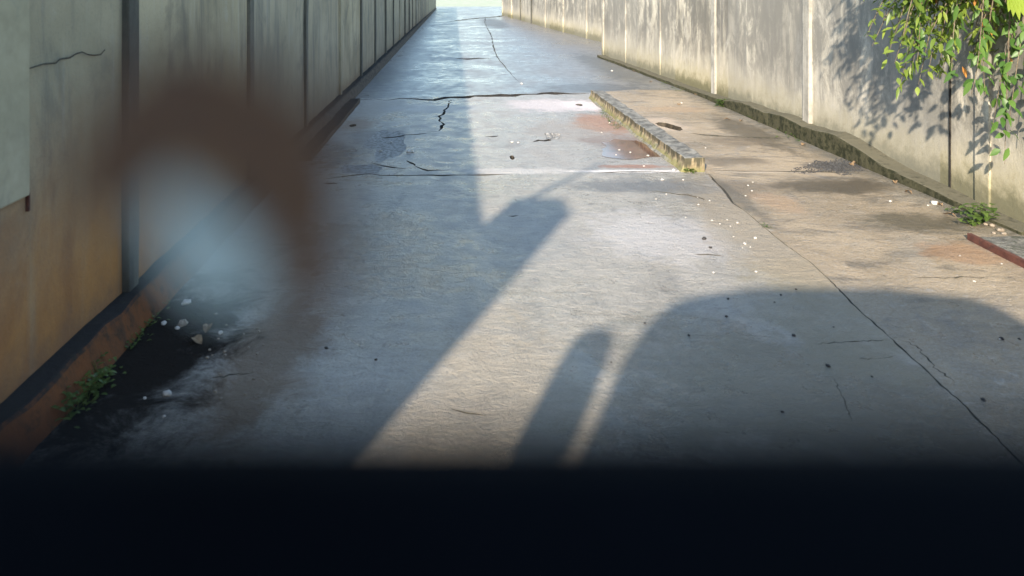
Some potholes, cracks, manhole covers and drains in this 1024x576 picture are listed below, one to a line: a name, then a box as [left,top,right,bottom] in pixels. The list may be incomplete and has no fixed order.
crack [373,161,444,171]
crack [821,339,955,382]
pothole [655,122,683,131]
crack [365,16,589,138]
